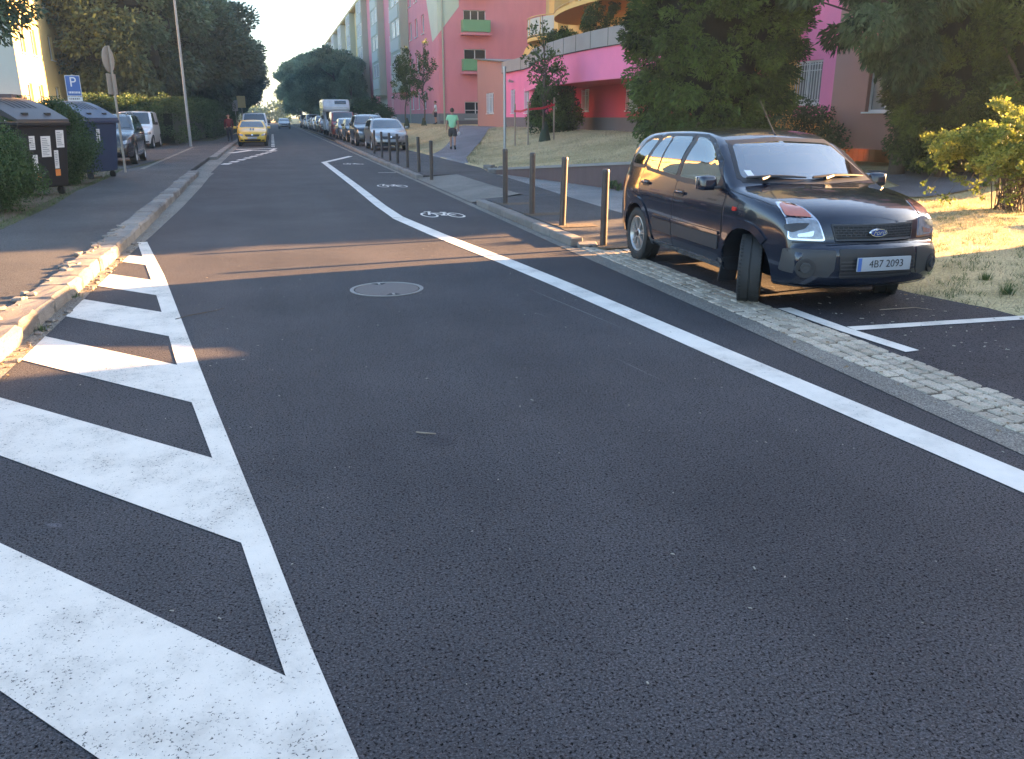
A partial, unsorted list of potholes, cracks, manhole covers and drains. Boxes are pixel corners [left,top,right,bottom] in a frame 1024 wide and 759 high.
manhole cover [350,282,423,297]
